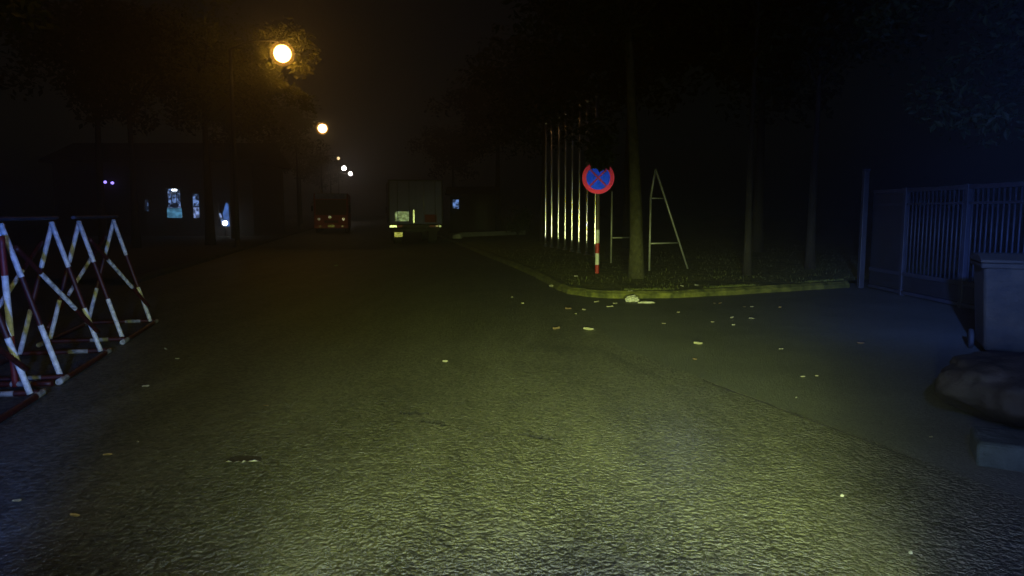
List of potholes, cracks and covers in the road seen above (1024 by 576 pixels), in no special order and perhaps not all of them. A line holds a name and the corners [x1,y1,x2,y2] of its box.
crack [399,410,449,426]
